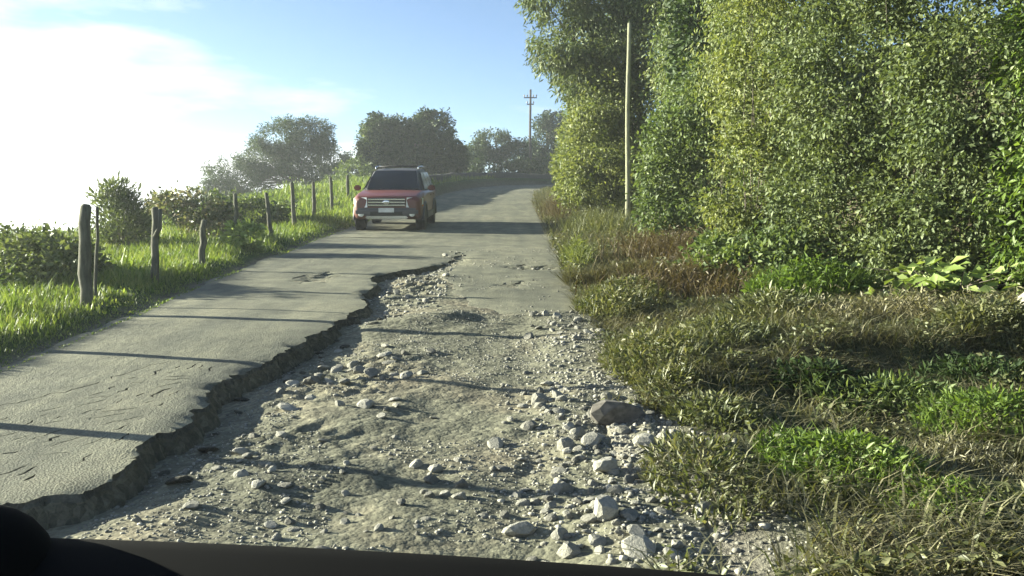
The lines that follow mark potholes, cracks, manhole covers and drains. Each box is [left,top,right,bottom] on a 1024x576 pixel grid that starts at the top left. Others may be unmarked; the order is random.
pothole [293,271,345,284]
pothole [346,255,478,324]
pothole [2,308,727,575]
